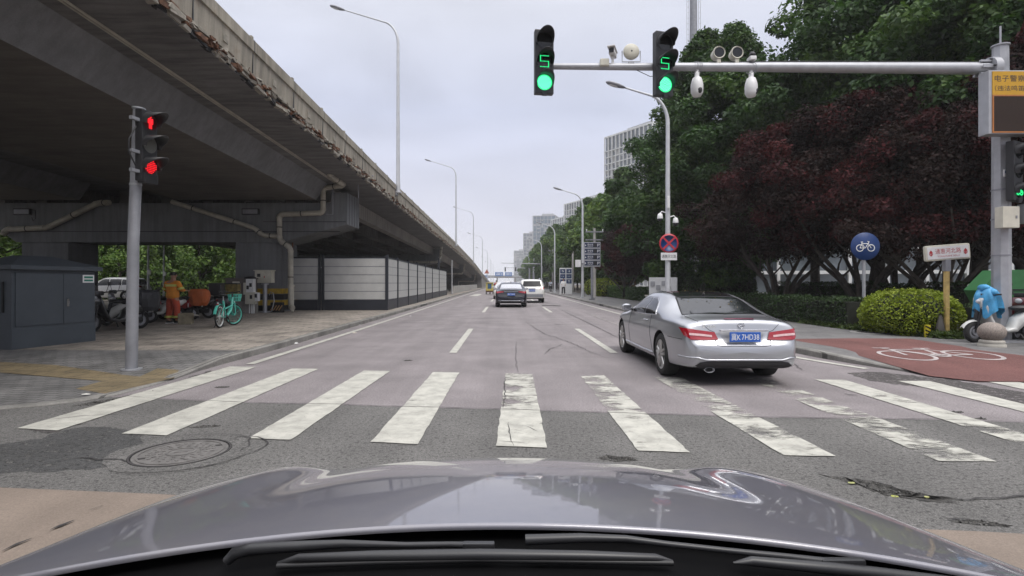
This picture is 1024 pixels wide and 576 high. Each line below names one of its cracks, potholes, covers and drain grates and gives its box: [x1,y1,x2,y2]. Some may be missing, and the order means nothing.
pothole [599,454,638,462]
pothole [951,519,1013,527]
manhole cover [126,438,232,467]
